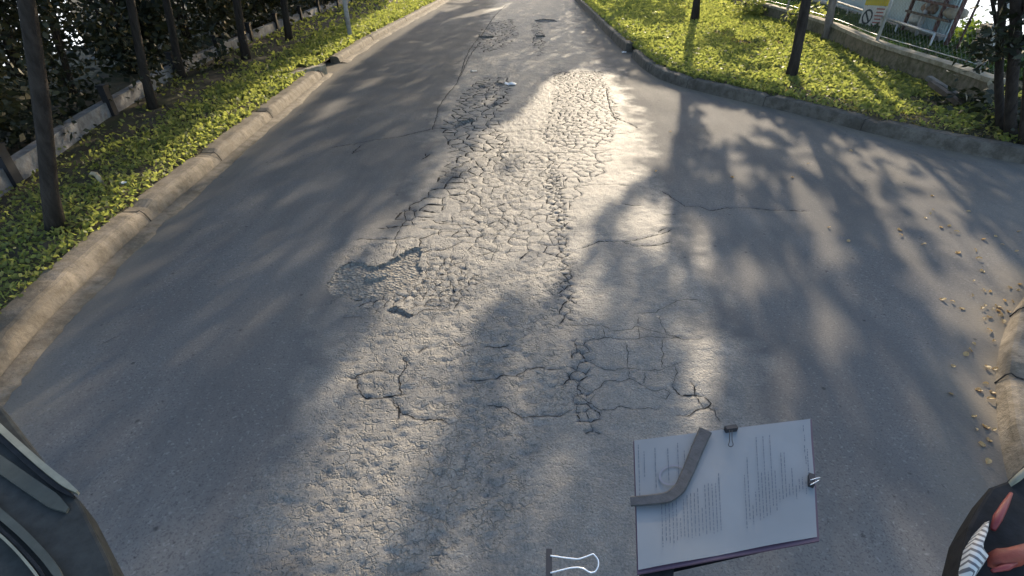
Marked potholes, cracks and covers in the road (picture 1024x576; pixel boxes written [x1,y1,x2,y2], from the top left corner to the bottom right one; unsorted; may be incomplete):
pothole [326,247,423,300]
crack [341,71,797,434]
pothole [387,306,413,318]
